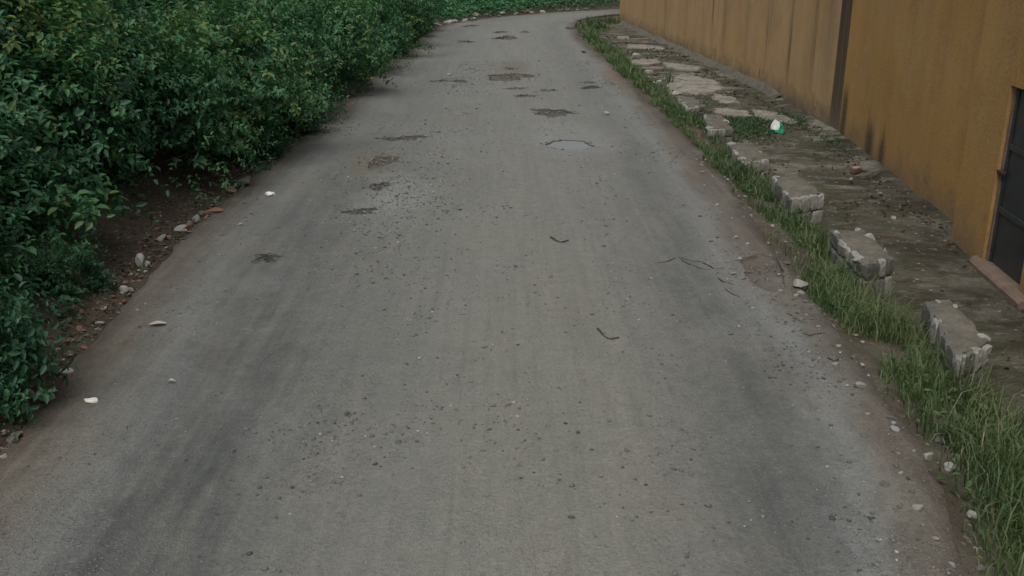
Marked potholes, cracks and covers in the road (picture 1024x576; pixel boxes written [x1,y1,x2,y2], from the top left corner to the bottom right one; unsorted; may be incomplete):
pothole [532,109,575,117]
pothole [545,140,594,150]
crack [659,257,739,297]
pothole [368,156,400,169]
pothole [486,73,535,81]
